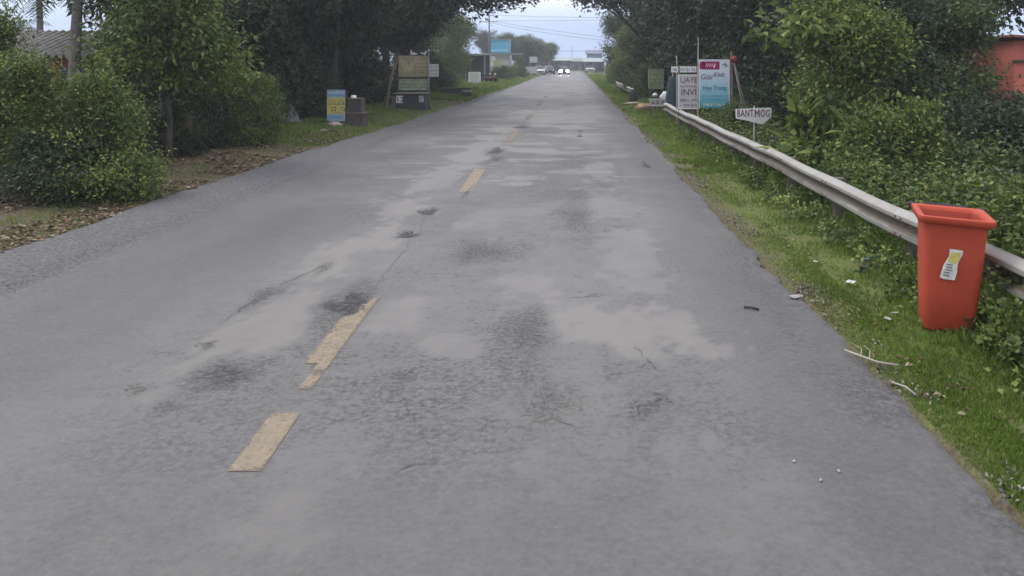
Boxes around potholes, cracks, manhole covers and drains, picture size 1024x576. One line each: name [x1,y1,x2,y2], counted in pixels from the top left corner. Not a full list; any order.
crack [608,391,673,417]
pothole [318,292,372,314]
